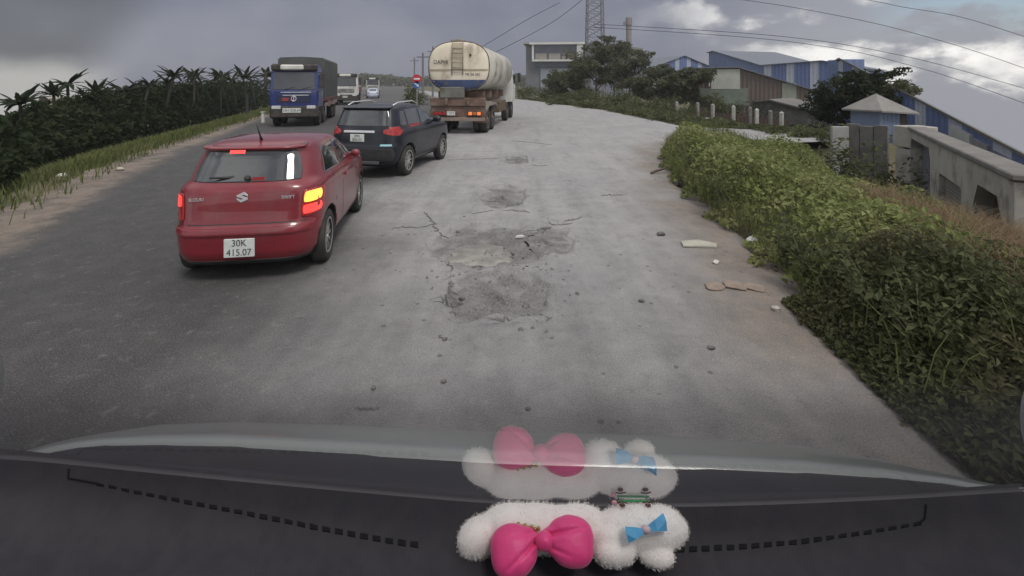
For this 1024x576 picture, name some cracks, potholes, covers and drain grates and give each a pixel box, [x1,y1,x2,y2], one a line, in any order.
crack [393,212,449,239]
pothole [427,266,566,331]
crack [472,198,580,233]
pothole [499,153,532,166]
pothole [472,183,533,213]
pothole [401,218,561,284]
